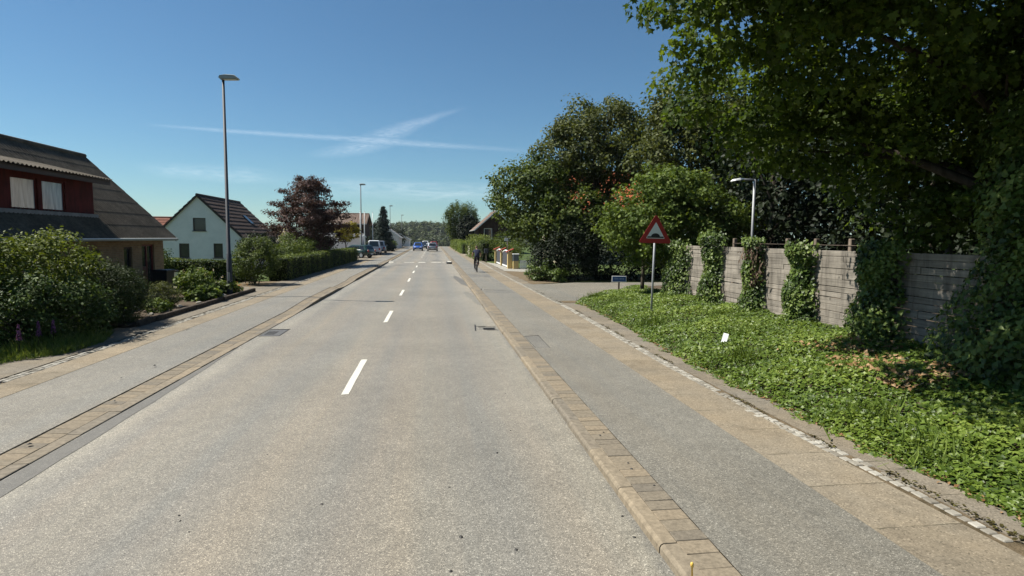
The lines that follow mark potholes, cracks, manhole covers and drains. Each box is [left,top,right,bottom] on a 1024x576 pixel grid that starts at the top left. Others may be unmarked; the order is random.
manhole cover [525,336,549,348]
